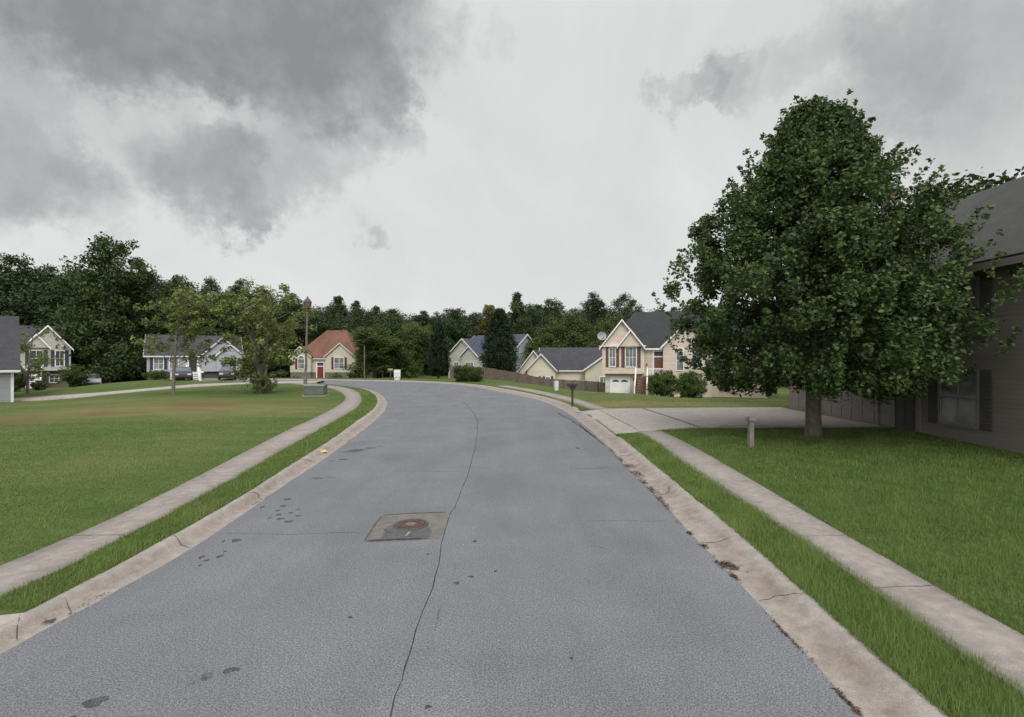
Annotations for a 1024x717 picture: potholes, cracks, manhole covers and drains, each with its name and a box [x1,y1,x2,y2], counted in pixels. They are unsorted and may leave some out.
manhole cover [393,519,429,530]
crack [364,402,478,717]
